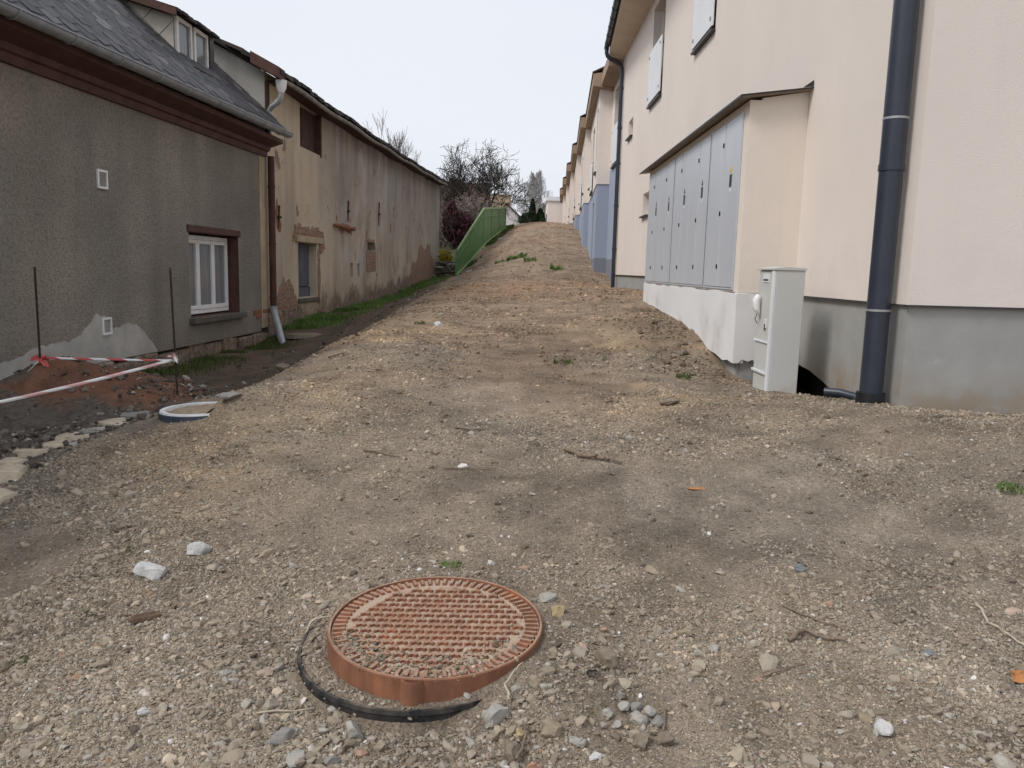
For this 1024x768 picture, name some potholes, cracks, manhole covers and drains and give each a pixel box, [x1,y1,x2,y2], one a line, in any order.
manhole cover [327,576,542,707]
